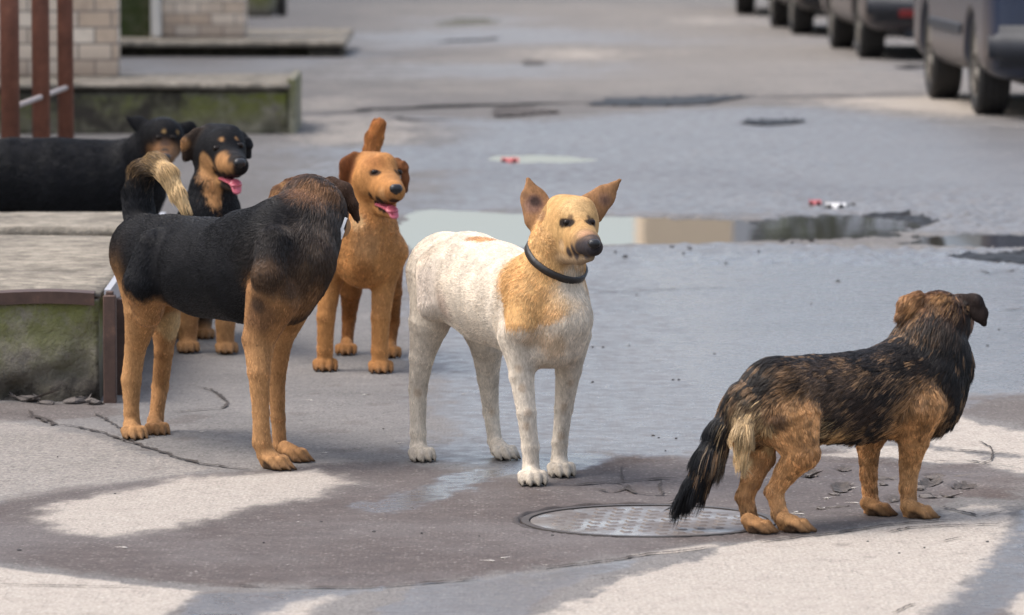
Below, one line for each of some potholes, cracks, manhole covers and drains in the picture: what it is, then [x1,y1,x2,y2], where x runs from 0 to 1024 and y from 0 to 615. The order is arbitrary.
manhole cover [512,502,776,538]
crack [1,410,248,469]
crack [578,466,675,494]
crack [178,386,230,412]
